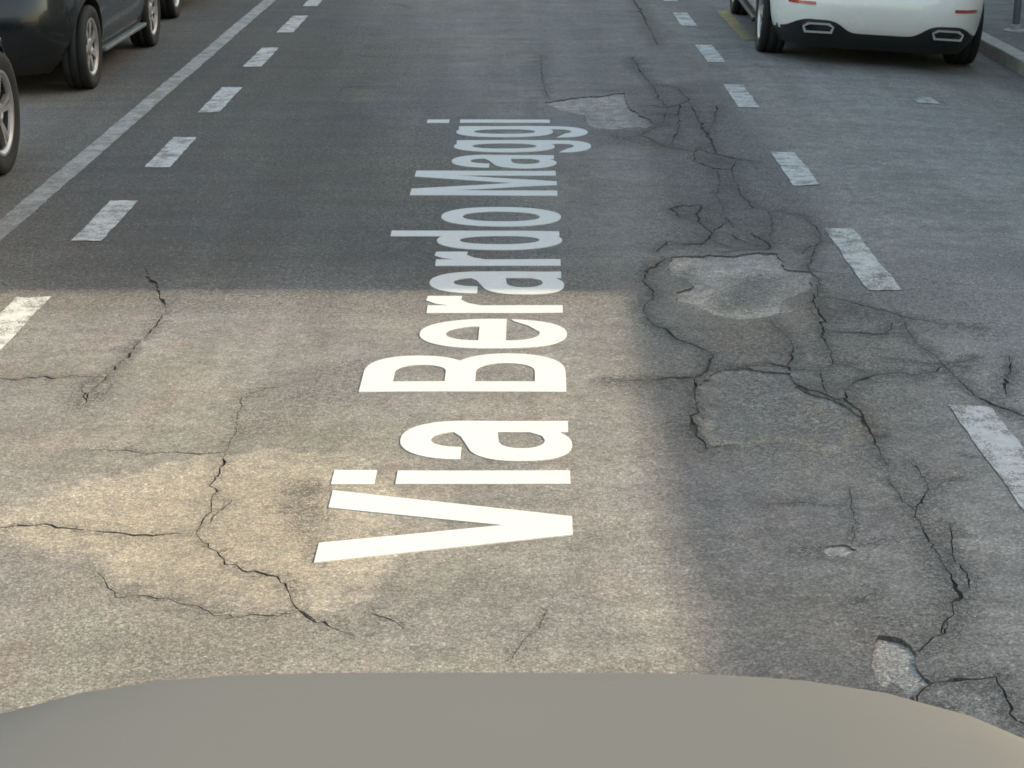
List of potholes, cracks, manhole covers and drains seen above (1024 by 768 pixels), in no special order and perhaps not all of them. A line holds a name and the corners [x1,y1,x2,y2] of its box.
crack [804,489,888,551]
crack [2,269,166,407]
crack [611,171,1024,464]
crack [616,57,755,174]
pothole [824,544,857,558]
crack [889,464,1024,725]
crack [0,365,355,636]
pothole [871,635,933,701]
